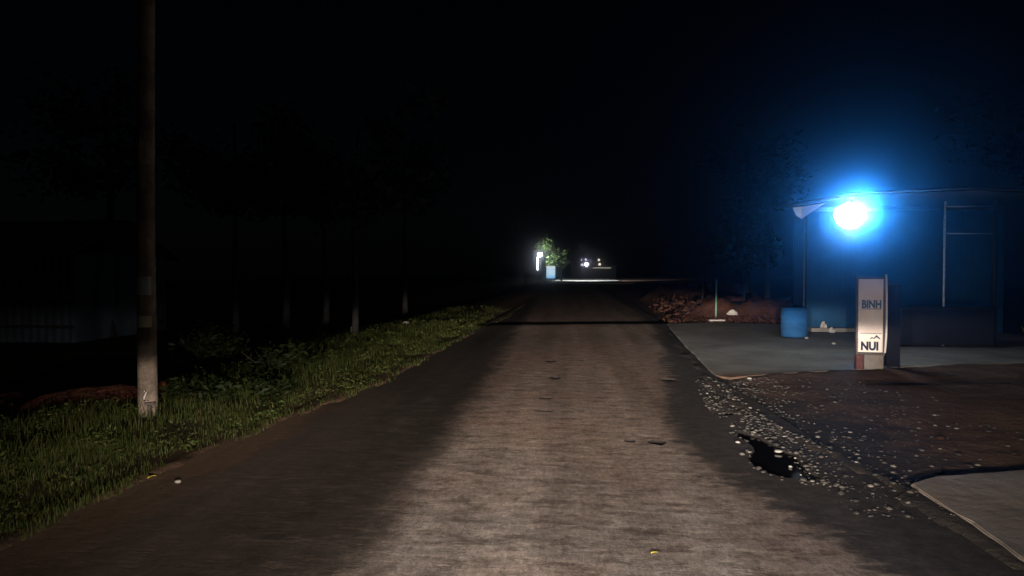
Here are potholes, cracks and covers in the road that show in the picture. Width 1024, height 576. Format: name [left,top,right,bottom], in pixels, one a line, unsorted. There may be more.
pothole [729,429,829,485]
